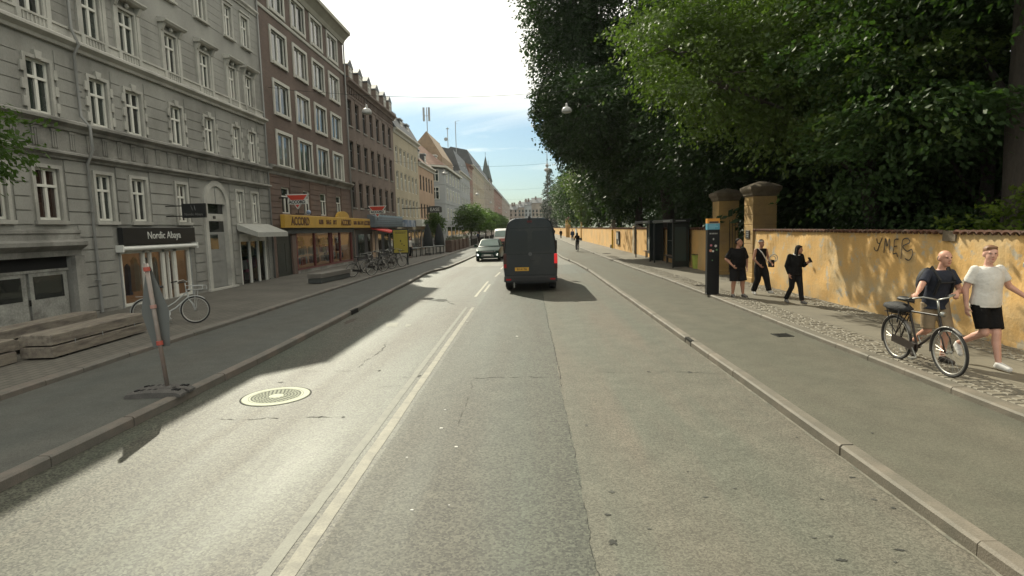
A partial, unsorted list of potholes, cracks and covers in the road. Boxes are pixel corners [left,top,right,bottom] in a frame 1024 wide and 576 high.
manhole cover [239,387,312,406]
